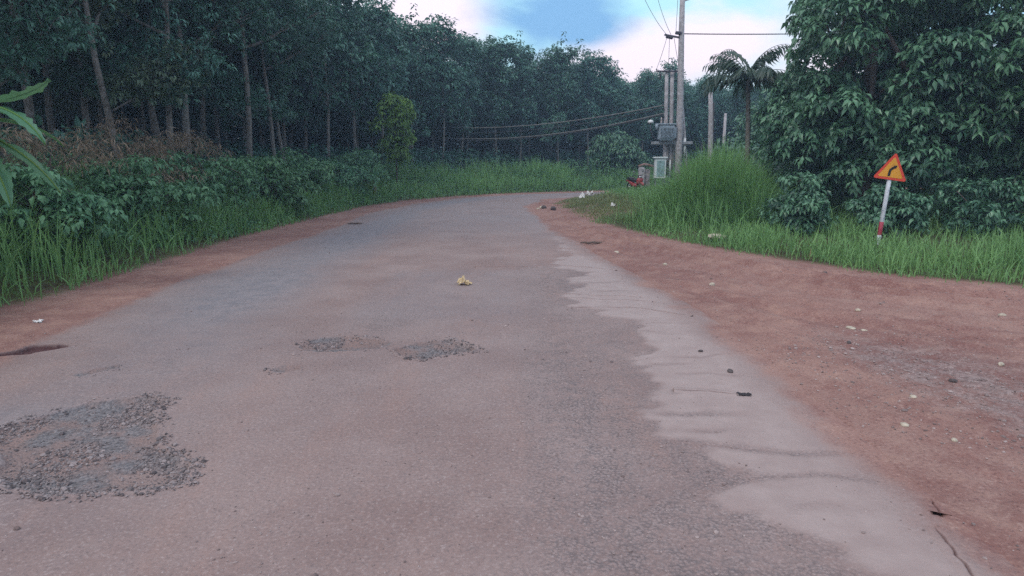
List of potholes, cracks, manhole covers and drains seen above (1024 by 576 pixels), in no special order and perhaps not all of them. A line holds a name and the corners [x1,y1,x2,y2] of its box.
pothole [0,391,208,503]
pothole [263,364,303,374]
crack [920,499,986,576]
pothole [295,335,395,353]
pothole [67,364,122,379]
pothole [0,343,76,358]
pothole [388,336,488,362]
